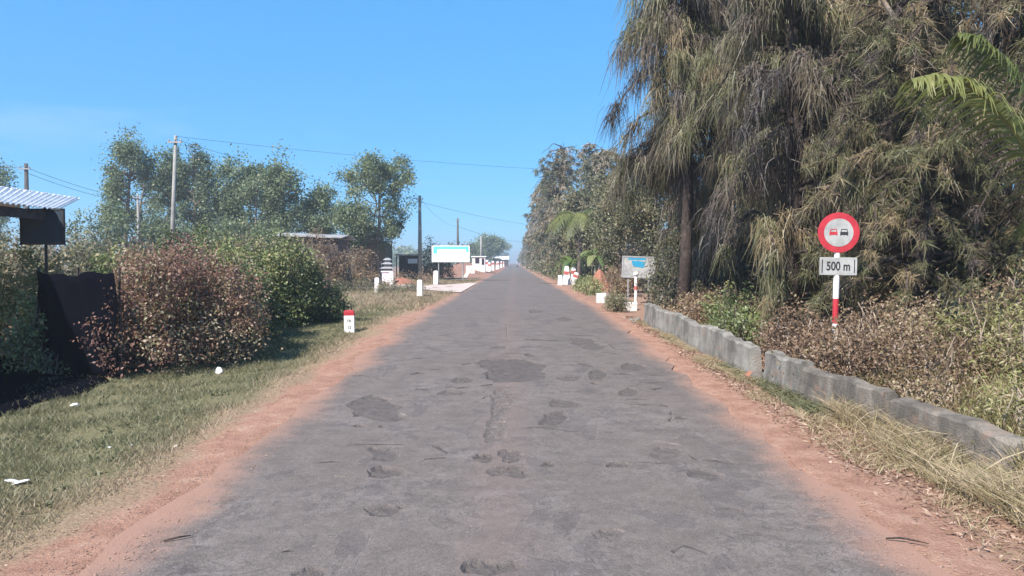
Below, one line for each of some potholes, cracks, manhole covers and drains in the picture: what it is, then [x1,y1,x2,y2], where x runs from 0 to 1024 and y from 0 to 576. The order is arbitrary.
pothole [587,369,609,381]
pothole [366,465,415,479]
pothole [473,358,549,383]
pothole [686,467,726,480]
pothole [345,394,411,423]
pothole [364,502,408,517]
pothole [537,409,570,426]
pothole [620,362,648,371]
pothole [472,453,495,463]
pothole [618,387,641,396]
pothole [460,557,526,576]
pothole [648,446,687,460]
